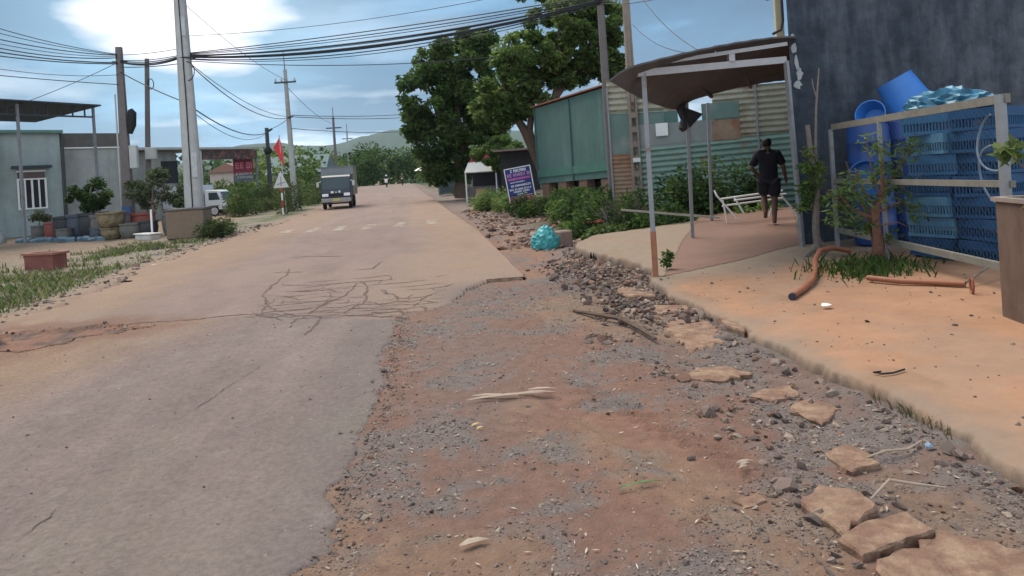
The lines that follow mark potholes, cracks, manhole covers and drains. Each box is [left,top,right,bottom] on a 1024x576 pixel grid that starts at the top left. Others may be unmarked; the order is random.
crack [123,261,451,335]
